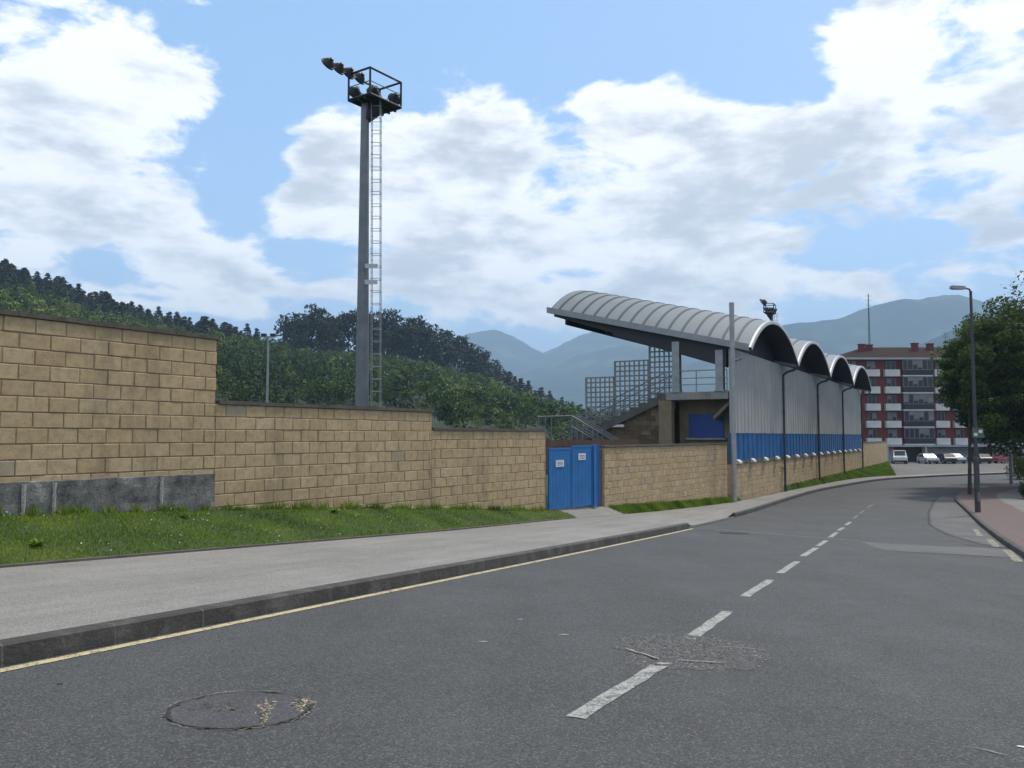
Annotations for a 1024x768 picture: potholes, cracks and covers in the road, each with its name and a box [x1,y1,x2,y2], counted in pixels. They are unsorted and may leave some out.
manhole cover [162,690,316,730]
